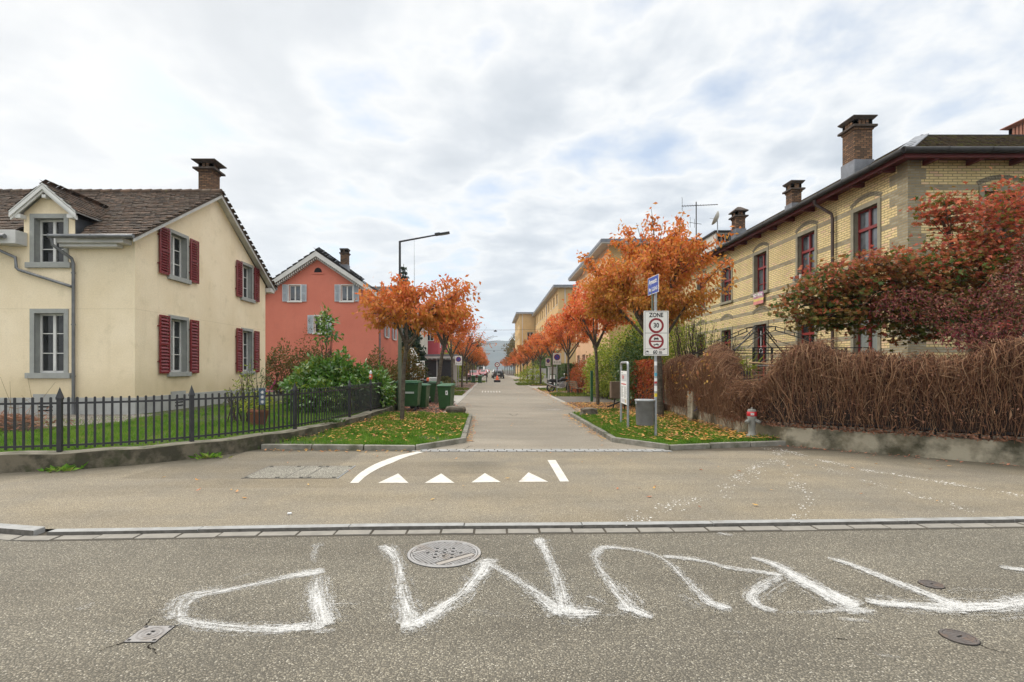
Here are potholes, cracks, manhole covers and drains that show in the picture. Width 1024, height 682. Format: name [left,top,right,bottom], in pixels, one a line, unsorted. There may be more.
utility cover [918,580,945,589]
utility cover [124,626,176,643]
manhole cover [407,540,481,568]
utility cover [938,628,981,646]
